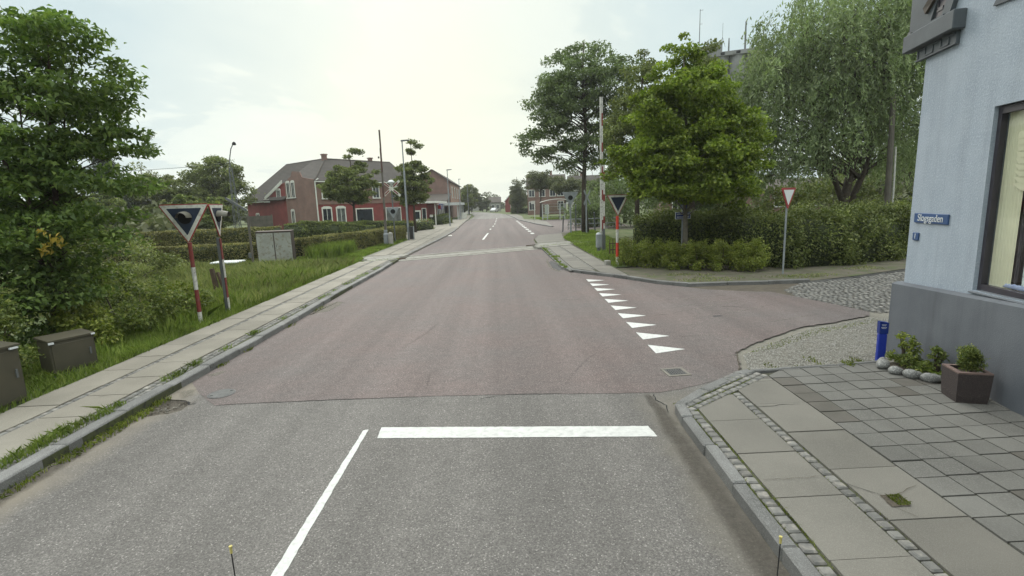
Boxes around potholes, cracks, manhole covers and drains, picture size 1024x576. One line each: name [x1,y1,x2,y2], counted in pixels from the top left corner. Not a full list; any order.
drain grate [660,367,692,377]
pothole [143,399,191,417]
manhole cover [207,389,236,399]
